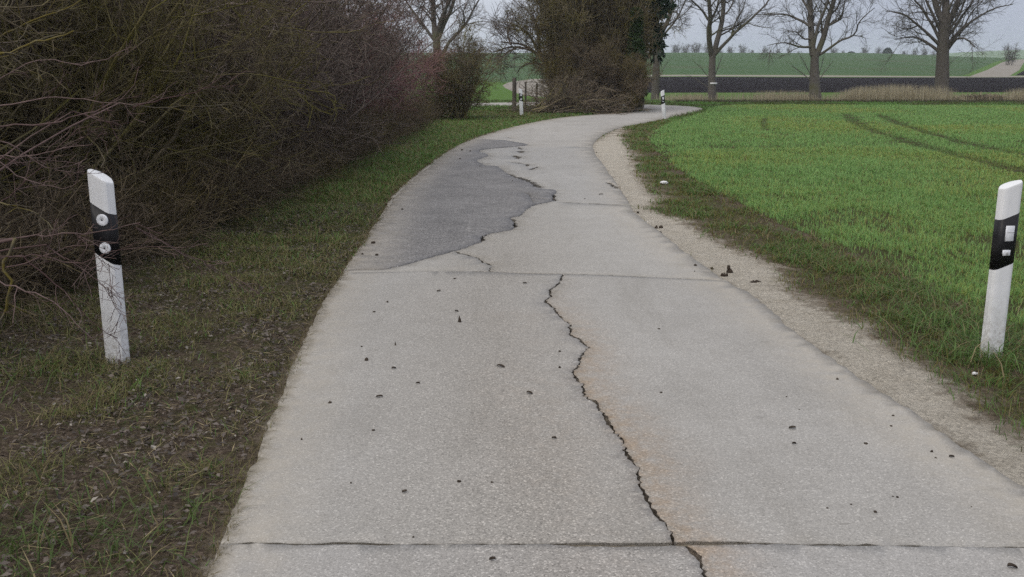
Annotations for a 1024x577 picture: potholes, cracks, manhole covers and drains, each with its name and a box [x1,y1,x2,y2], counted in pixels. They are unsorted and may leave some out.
crack [544,275,707,577]
